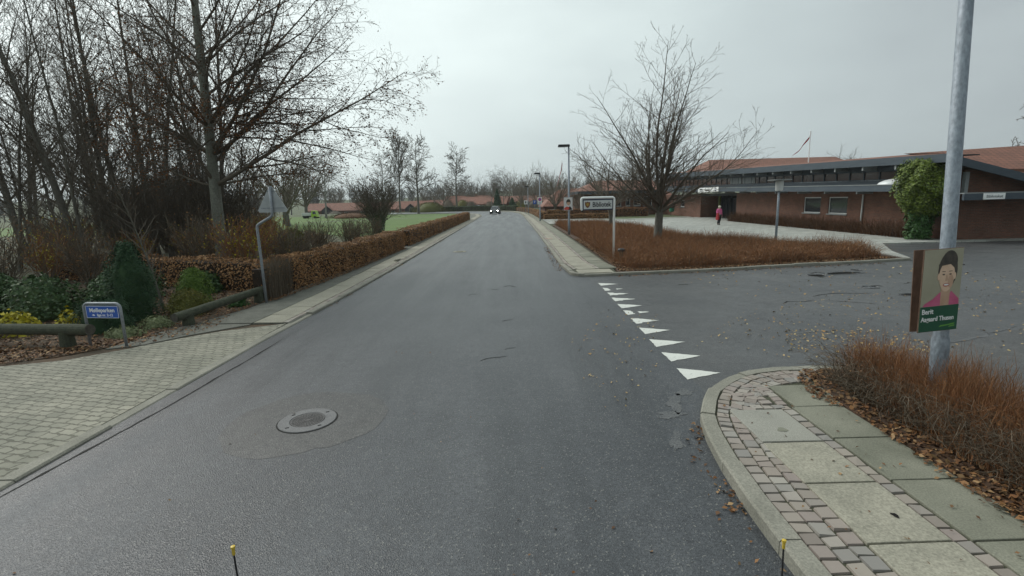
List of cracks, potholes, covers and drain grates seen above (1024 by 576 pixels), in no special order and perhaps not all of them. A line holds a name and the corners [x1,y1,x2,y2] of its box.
manhole cover [276,408,338,434]
